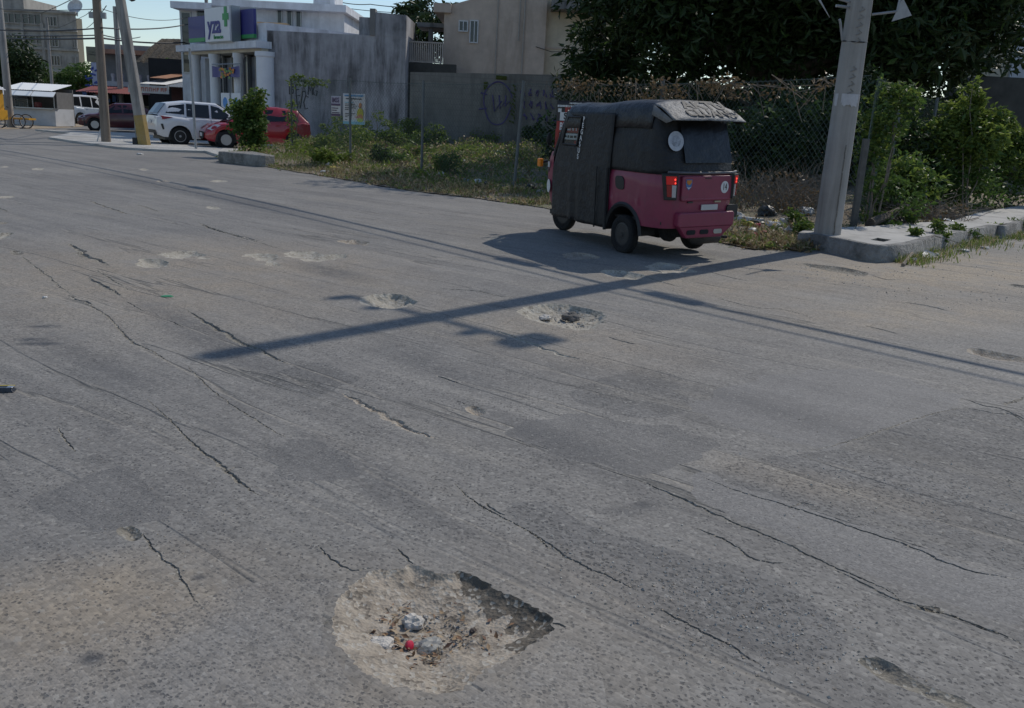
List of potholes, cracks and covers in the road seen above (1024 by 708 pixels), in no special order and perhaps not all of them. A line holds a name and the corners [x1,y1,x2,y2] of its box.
pothole [359,294,418,309]
pothole [135,259,169,268]
crack [58,428,76,452]
crack [147,399,262,496]
pothole [857,657,976,708]
pothole [284,251,348,262]
pothole [967,348,1024,362]
crack [530,531,634,589]
pothole [332,564,555,694]
pothole [157,251,211,259]
crack [142,534,198,603]
crack [657,607,760,665]
